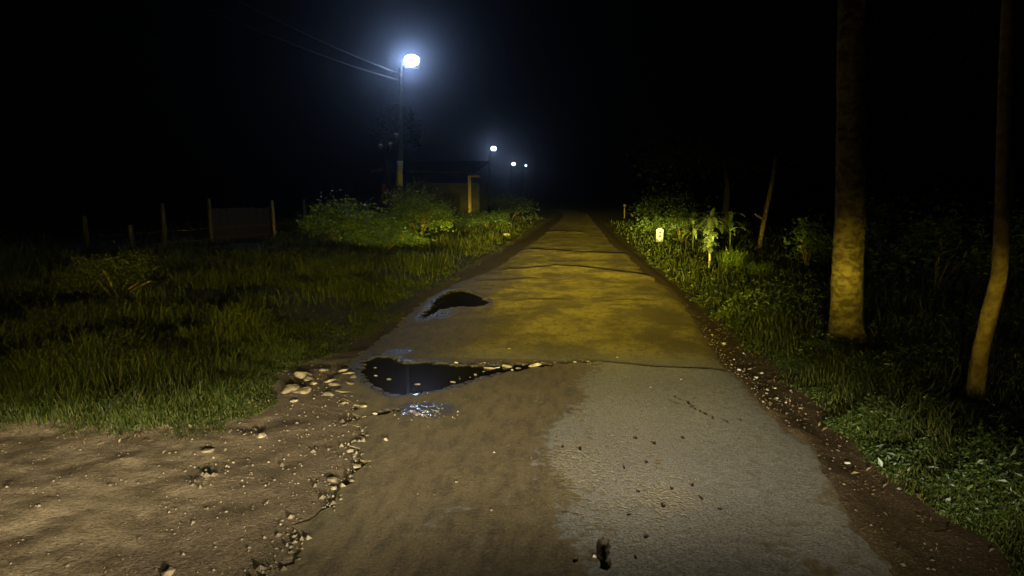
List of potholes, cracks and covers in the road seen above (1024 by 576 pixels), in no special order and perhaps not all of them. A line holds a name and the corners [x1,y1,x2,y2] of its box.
pothole [419,289,490,319]
pothole [360,355,555,395]
pothole [596,536,612,571]
crack [668,395,732,423]
